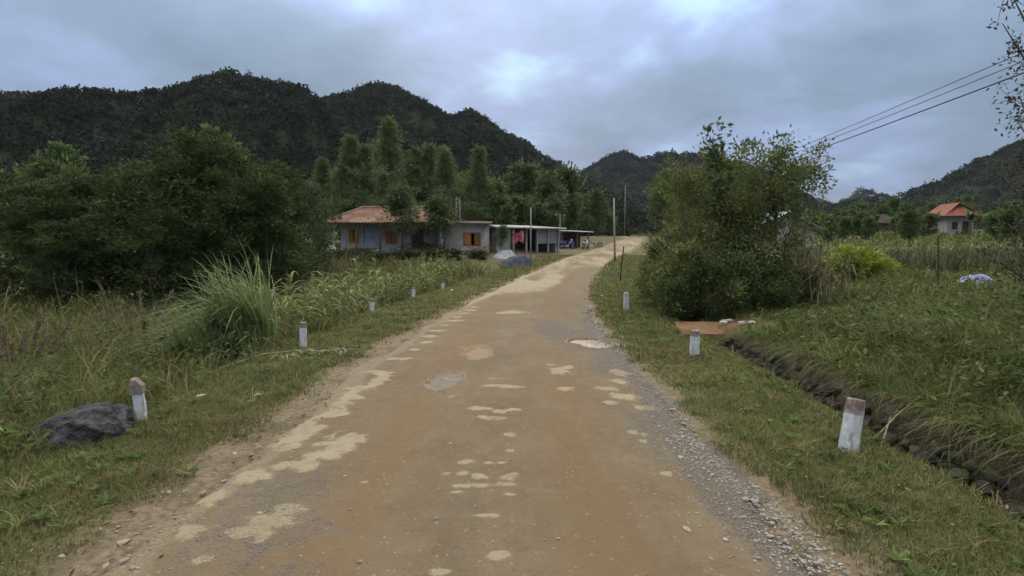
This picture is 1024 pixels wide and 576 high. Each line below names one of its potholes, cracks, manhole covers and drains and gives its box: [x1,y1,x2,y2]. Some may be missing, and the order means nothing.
pothole [423,371,467,391]
